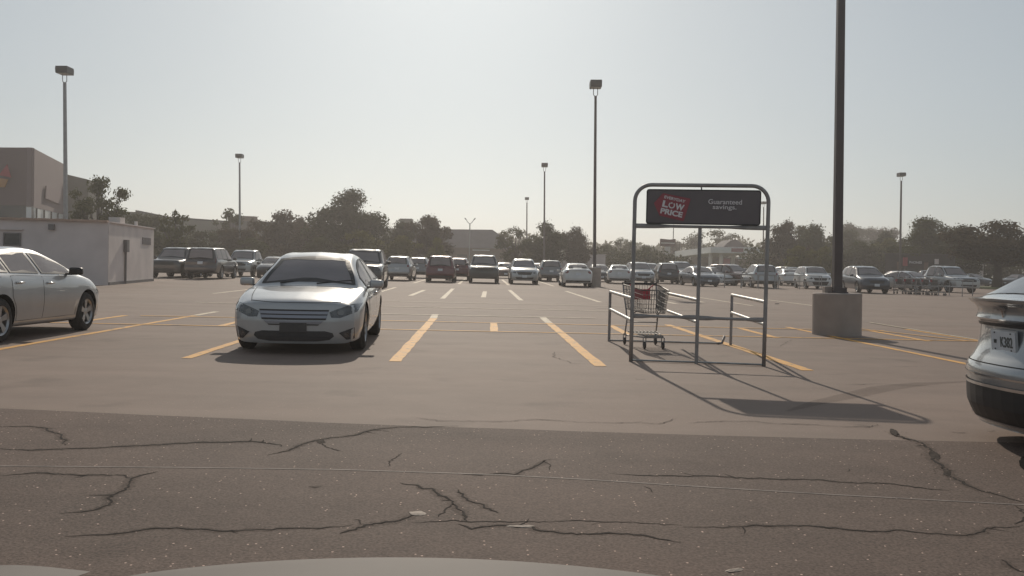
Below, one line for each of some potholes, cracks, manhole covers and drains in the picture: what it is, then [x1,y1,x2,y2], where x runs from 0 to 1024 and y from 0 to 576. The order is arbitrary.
crack [614,469,941,492]
crack [1,418,671,454]
crack [712,525,1017,535]
crack [891,433,1024,524]
crack [2,472,154,513]
crack [76,459,678,542]
